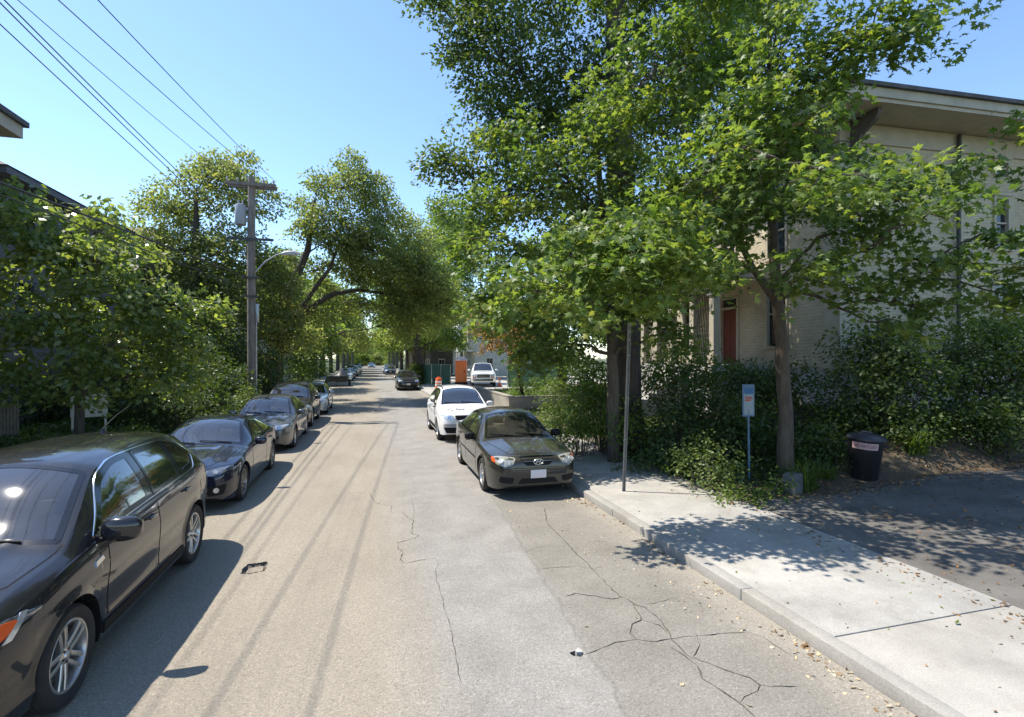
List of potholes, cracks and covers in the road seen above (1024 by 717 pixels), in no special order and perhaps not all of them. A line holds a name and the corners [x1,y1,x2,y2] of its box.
crack [349,493,462,683]
pothole [240,561,268,574]
crack [532,509,797,717]
